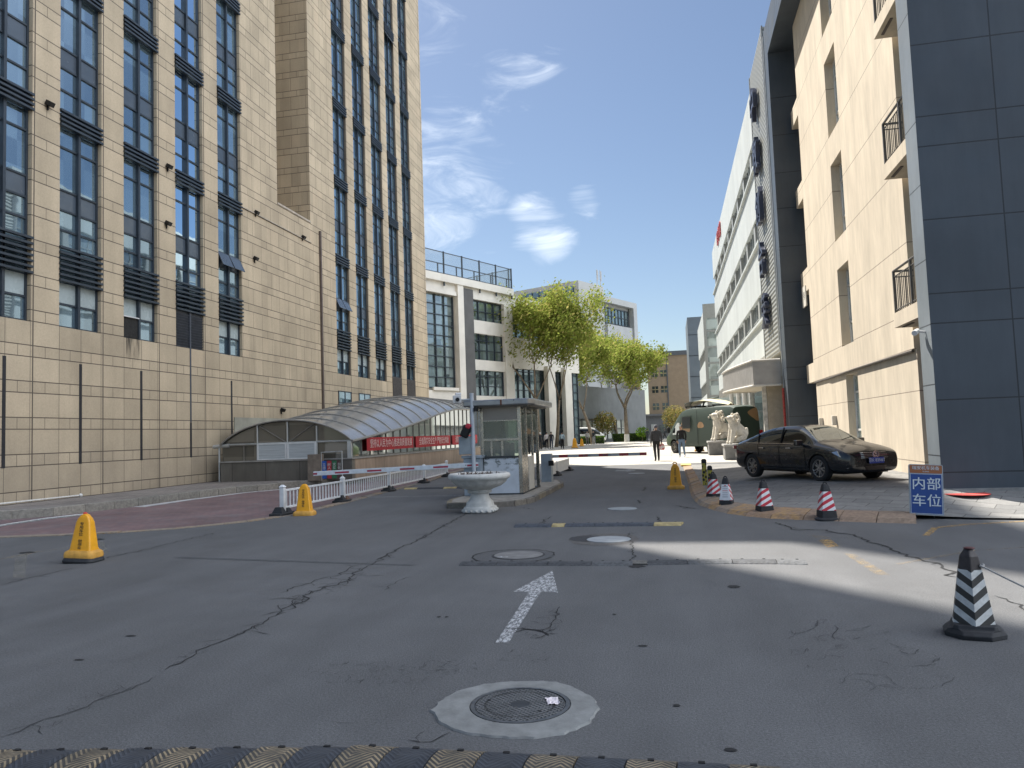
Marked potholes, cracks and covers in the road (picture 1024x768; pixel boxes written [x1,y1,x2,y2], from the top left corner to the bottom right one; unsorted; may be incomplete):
crack [5,680,150,736]
manhole cover [492,551,545,560]
manhole cover [429,681,600,740]
crack [161,513,468,669]
crack [775,522,957,577]
crack [791,619,953,689]
crack [508,607,562,662]
